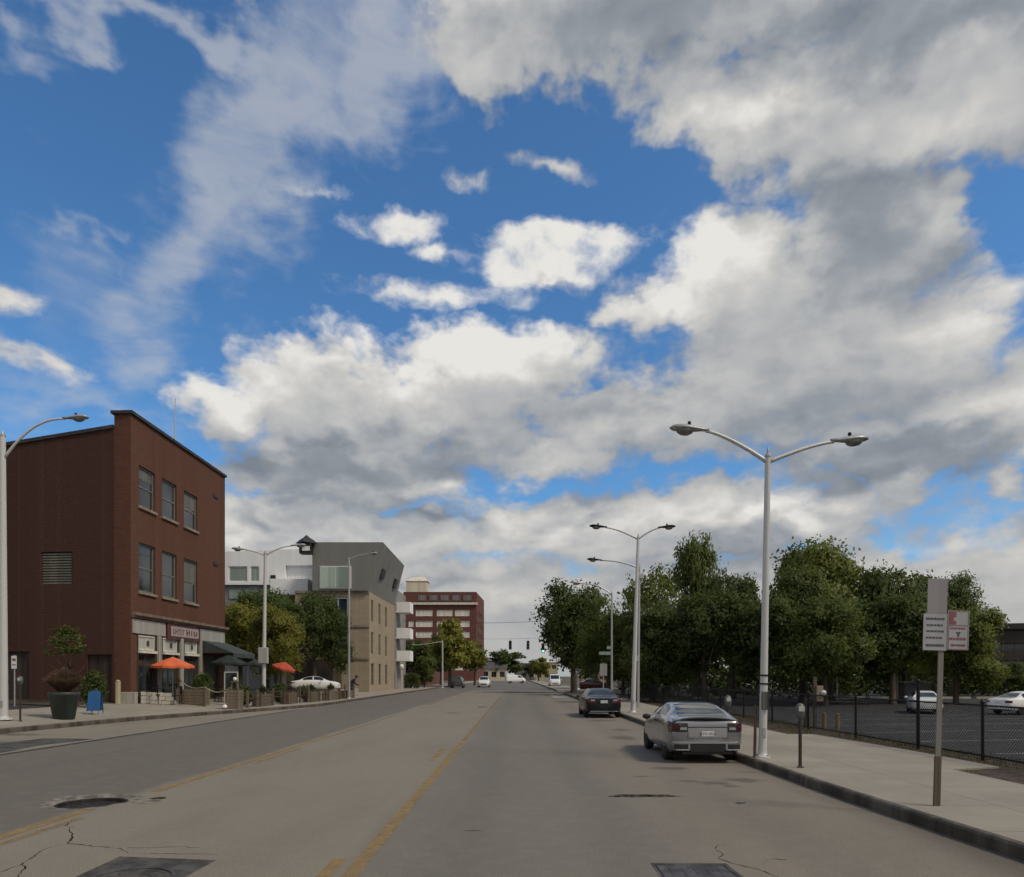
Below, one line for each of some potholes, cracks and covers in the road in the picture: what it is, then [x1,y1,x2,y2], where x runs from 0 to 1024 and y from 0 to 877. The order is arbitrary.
manhole cover [650,863,743,877]
manhole cover [38,794,144,810]
crack [1,818,215,877]
crack [715,844,785,877]
manhole cover [76,856,216,877]
